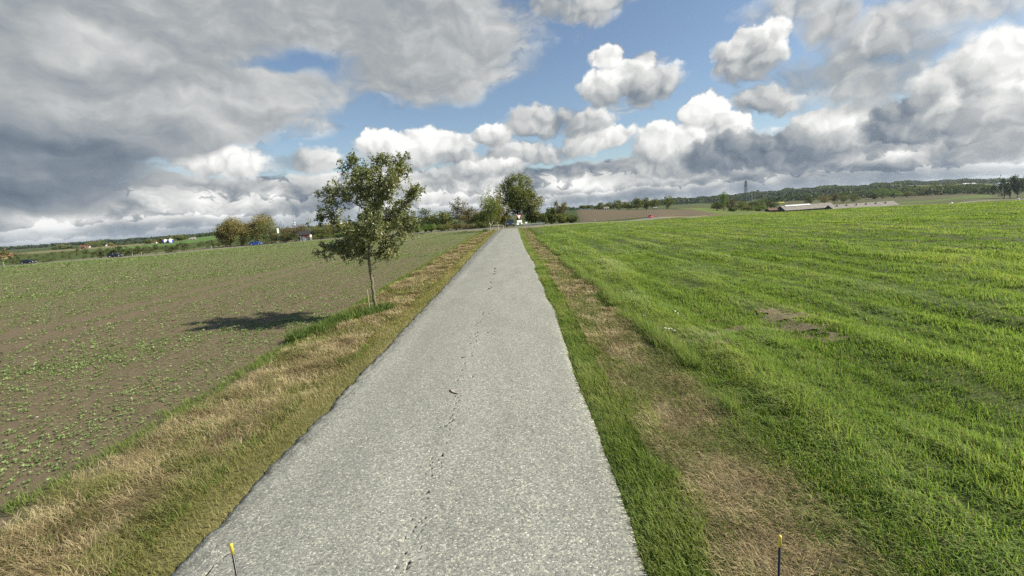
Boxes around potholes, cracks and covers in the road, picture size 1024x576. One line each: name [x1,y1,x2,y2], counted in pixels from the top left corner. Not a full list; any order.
crack [395,268,496,570]
